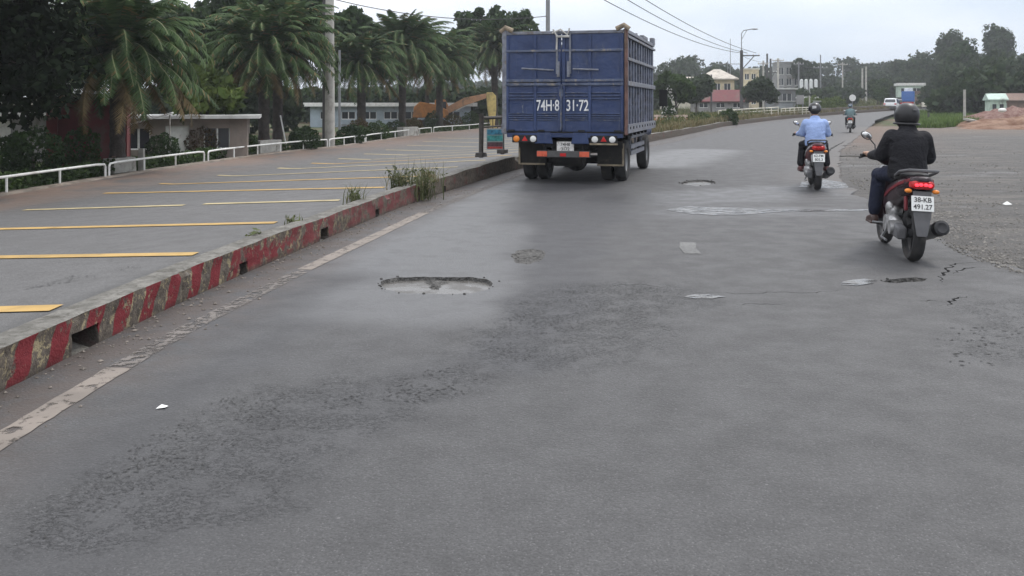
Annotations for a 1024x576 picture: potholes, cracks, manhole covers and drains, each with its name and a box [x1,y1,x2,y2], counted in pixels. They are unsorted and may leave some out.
pothole [377,276,500,295]
crack [927,262,976,306]
pothole [511,249,546,264]
